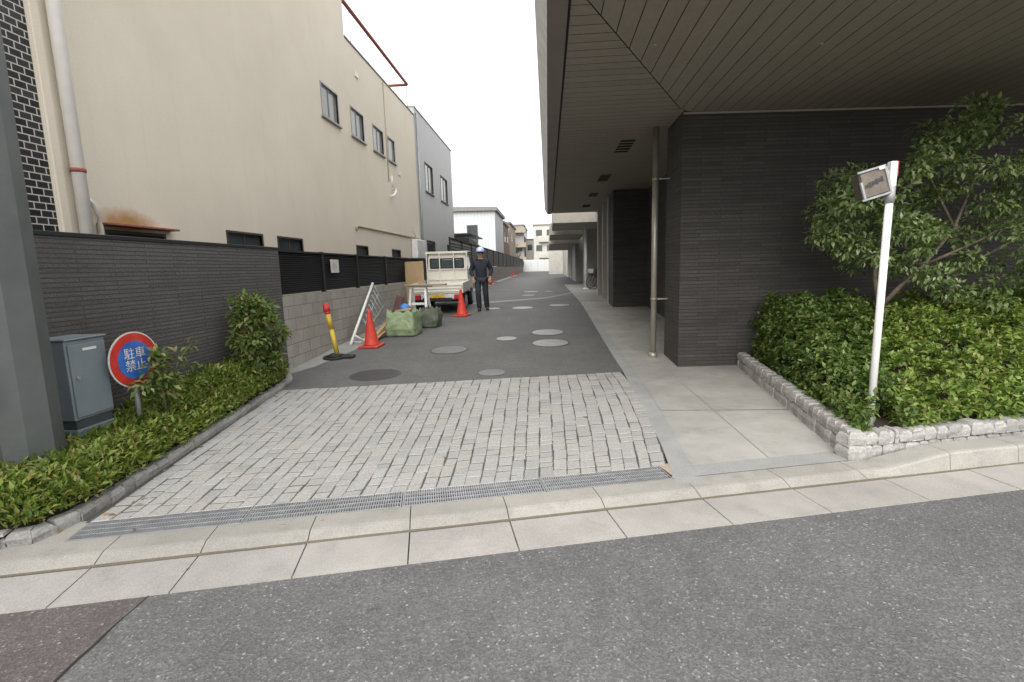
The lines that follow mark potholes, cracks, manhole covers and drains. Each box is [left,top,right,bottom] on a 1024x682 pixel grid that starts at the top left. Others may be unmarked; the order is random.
manhole cover [531,339,570,347]
manhole cover [348,369,402,381]
drain grate [402,477,546,507]
manhole cover [430,346,468,354]
drain grate [539,465,673,492]
